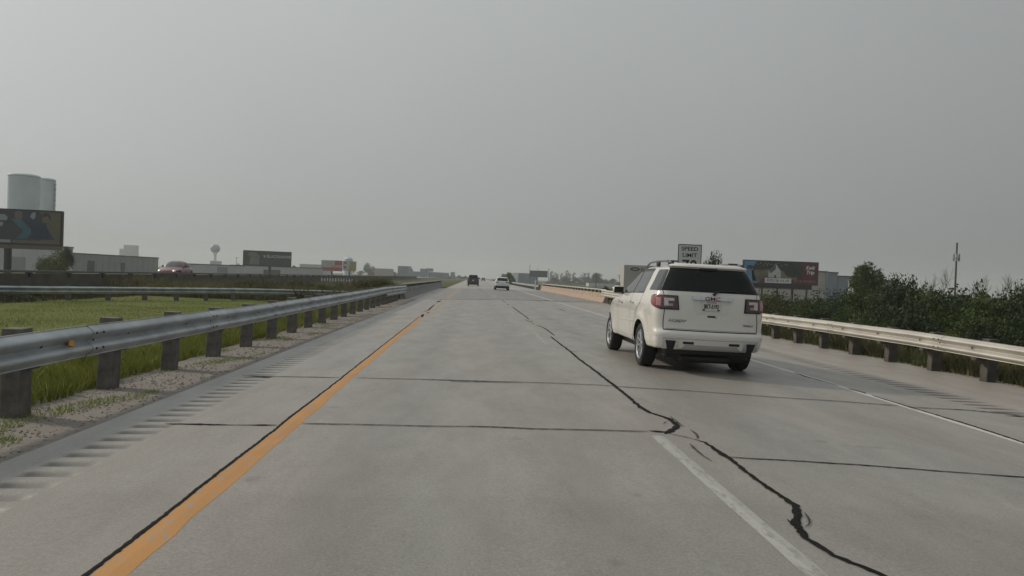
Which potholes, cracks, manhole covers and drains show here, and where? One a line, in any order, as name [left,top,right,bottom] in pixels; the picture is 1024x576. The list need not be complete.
crack [502,300,887,576]
